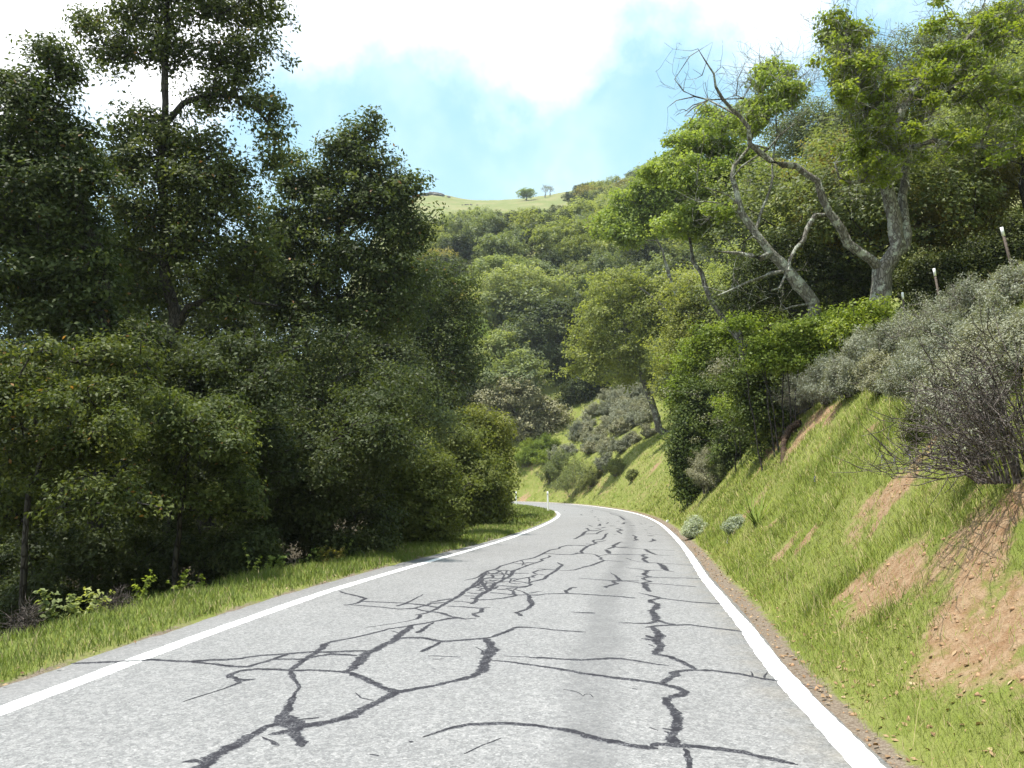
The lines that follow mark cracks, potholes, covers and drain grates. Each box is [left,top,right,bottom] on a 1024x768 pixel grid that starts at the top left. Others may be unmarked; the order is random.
crack [511,656,669,666]
crack [682,748,694,768]
